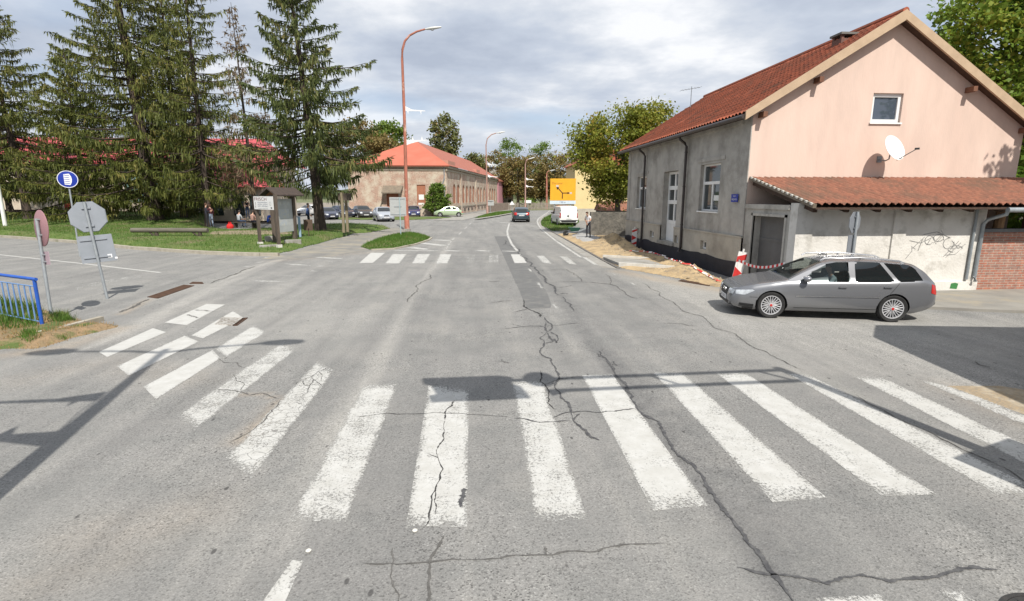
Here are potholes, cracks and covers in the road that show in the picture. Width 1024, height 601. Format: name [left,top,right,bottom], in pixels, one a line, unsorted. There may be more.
drain grate [148,285,194,299]
crack [357,300,997,601]
crack [218,360,326,441]
